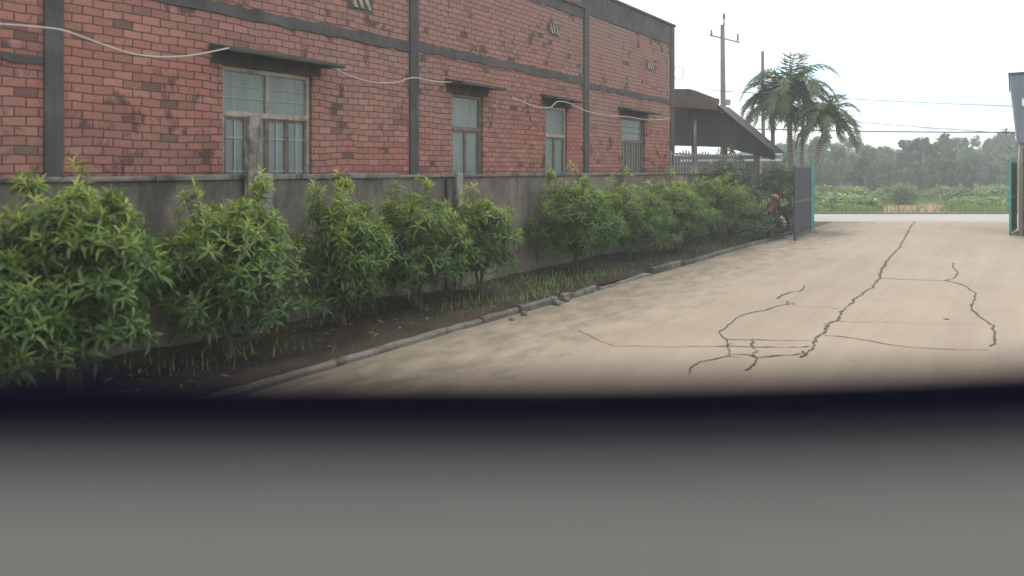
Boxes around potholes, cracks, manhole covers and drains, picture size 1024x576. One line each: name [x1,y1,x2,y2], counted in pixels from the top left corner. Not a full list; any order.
crack [579,222,997,373]
